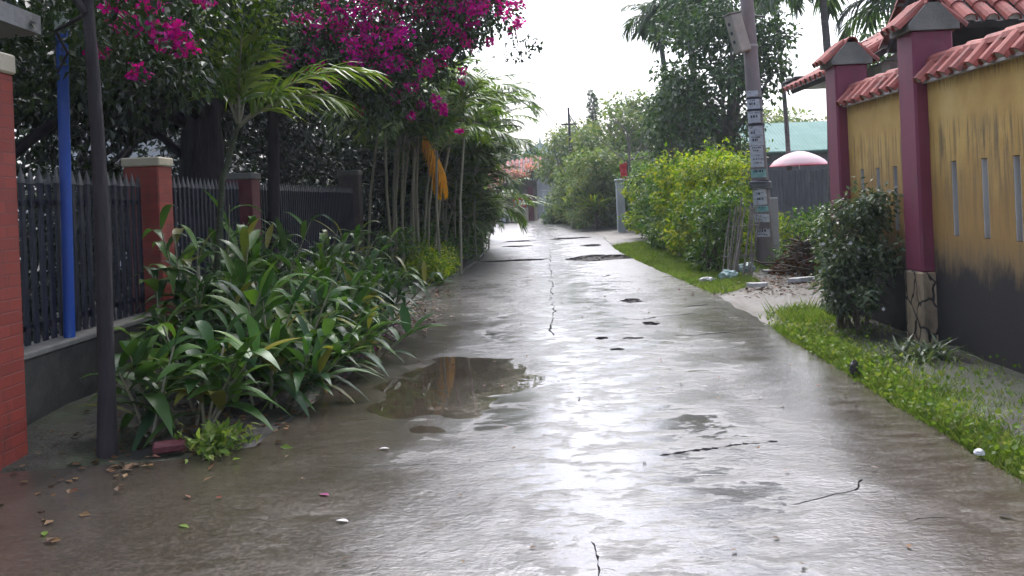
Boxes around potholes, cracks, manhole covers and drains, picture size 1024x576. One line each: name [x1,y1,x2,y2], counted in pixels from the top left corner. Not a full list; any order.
crack [591,542,615,576]
crack [548,249,556,336]
crack [792,479,876,505]
crack [659,440,778,456]
